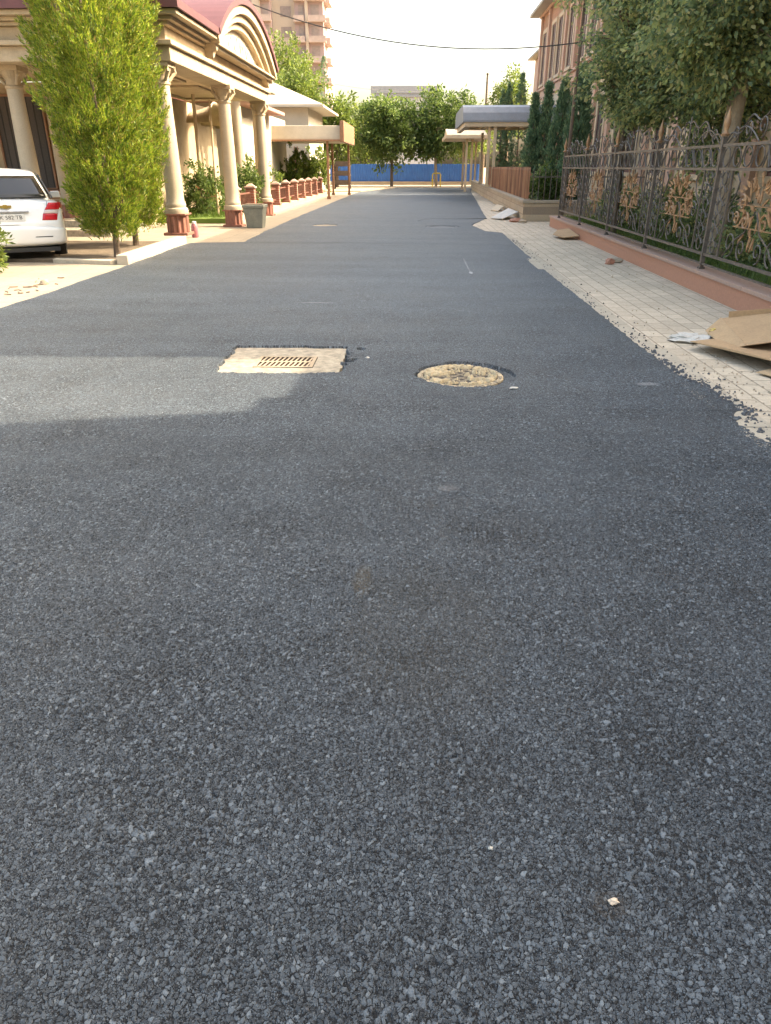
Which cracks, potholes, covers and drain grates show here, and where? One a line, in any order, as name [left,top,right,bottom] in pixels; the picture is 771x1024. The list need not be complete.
drain grate [218,348,346,374]
manhole cover [417,364,503,387]
